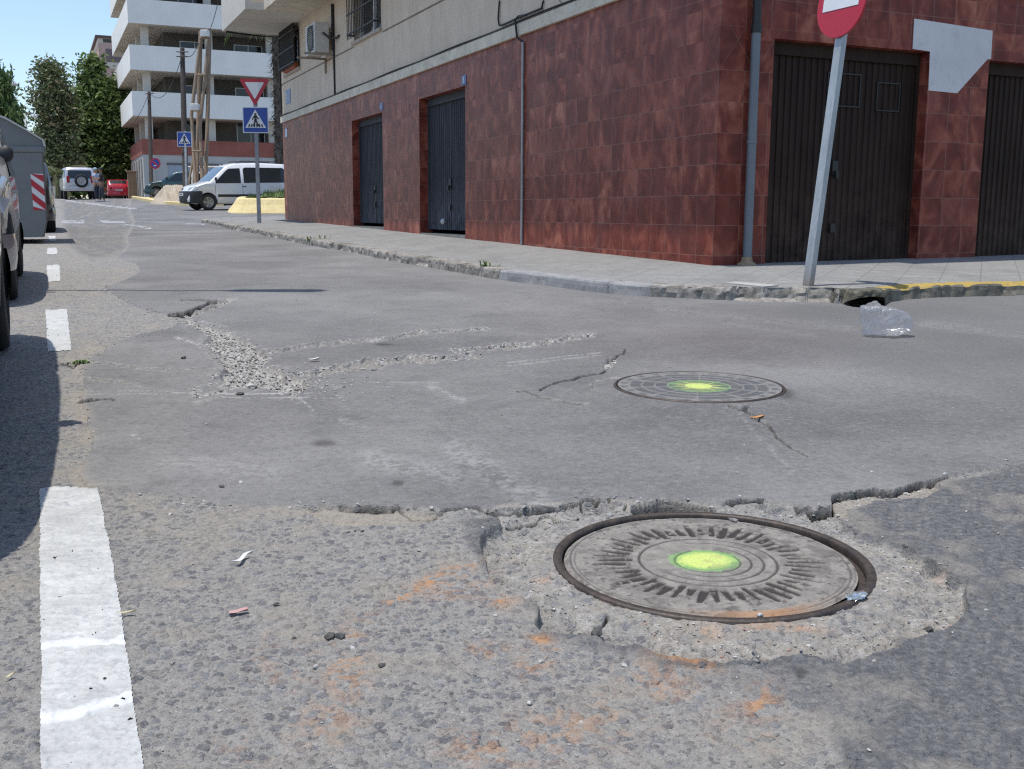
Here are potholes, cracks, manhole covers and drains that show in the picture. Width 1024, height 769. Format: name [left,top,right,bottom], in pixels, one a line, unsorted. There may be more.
manhole cover [553,512,877,625]
crack [260,328,592,382]
crack [729,403,808,458]
crack [513,348,626,406]
manhole cover [613,371,787,403]
crack [170,299,218,318]
